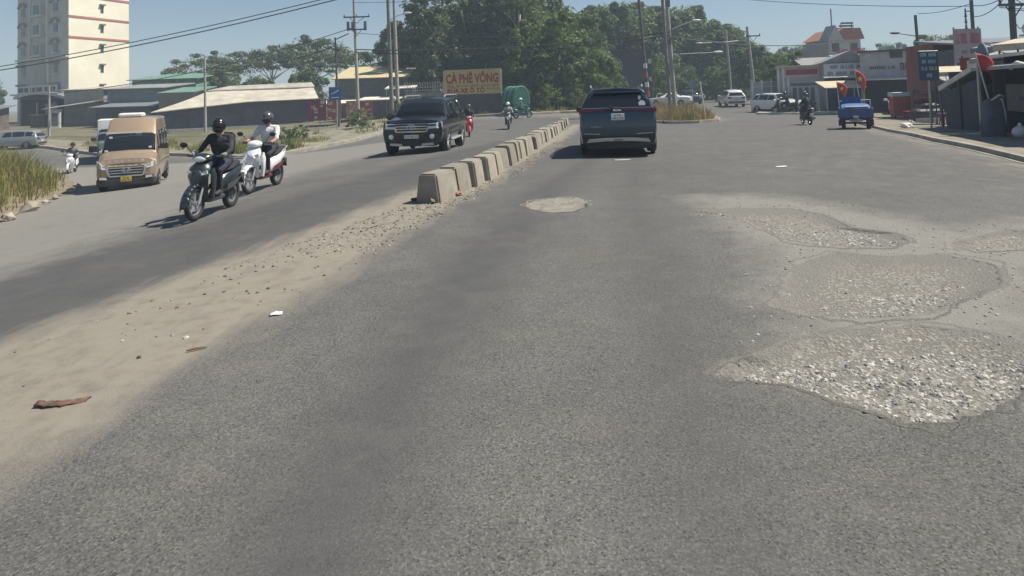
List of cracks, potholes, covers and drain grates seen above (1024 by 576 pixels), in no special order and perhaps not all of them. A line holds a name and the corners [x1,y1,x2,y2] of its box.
pothole [691,207,919,250]
pothole [943,229,1024,252]
pothole [760,250,1014,325]
pothole [701,321,1024,437]
